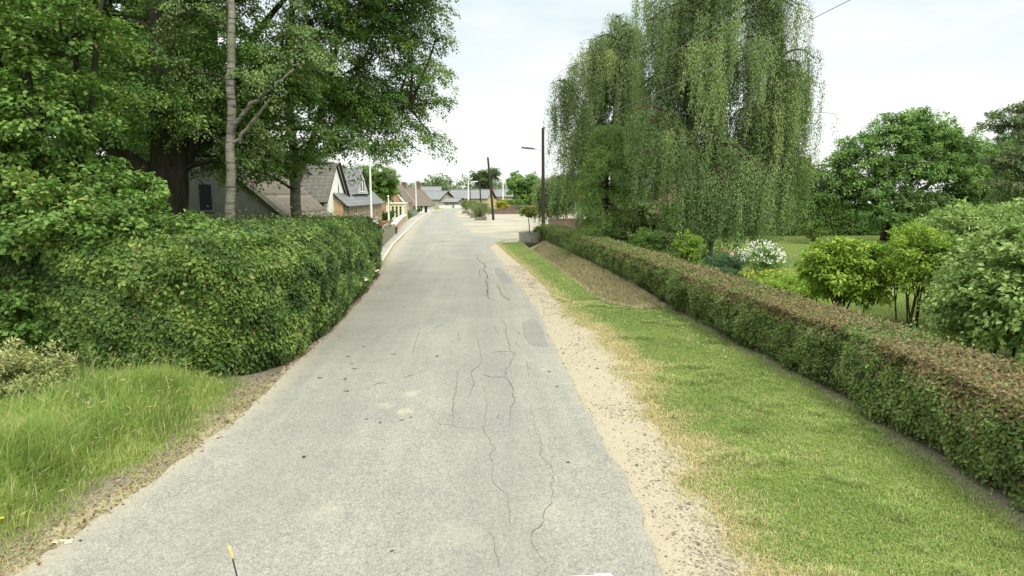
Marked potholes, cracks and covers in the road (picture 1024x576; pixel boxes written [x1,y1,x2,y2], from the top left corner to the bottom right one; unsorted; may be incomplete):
crack [445,322,555,571]
